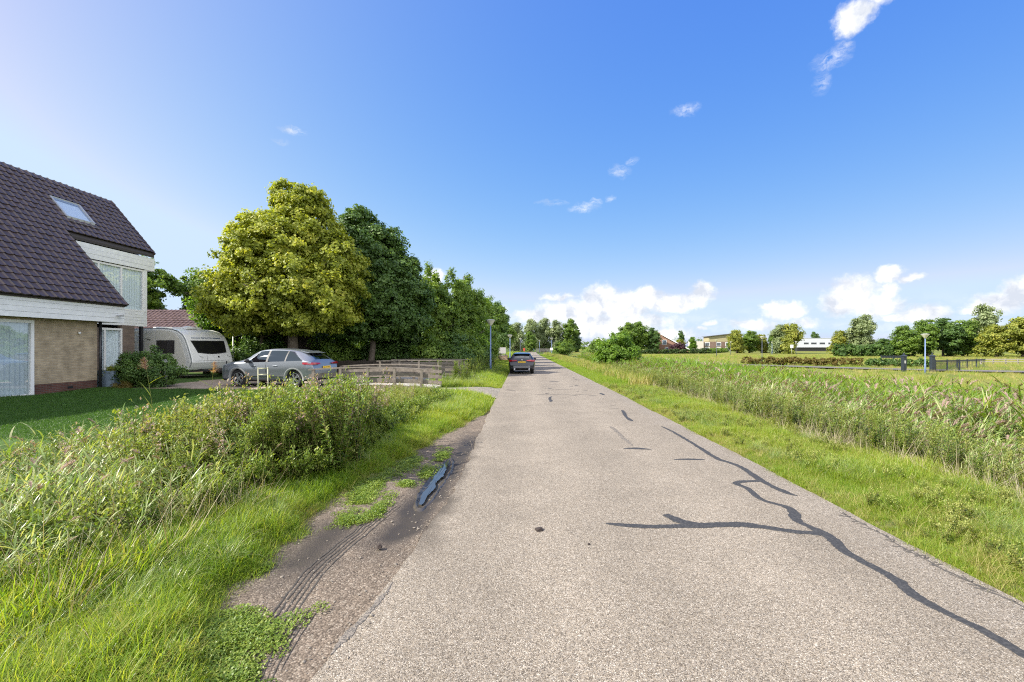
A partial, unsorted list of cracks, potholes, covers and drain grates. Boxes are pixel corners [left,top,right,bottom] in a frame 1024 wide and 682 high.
crack [534,379,617,409]
pothole [413,458,454,512]
